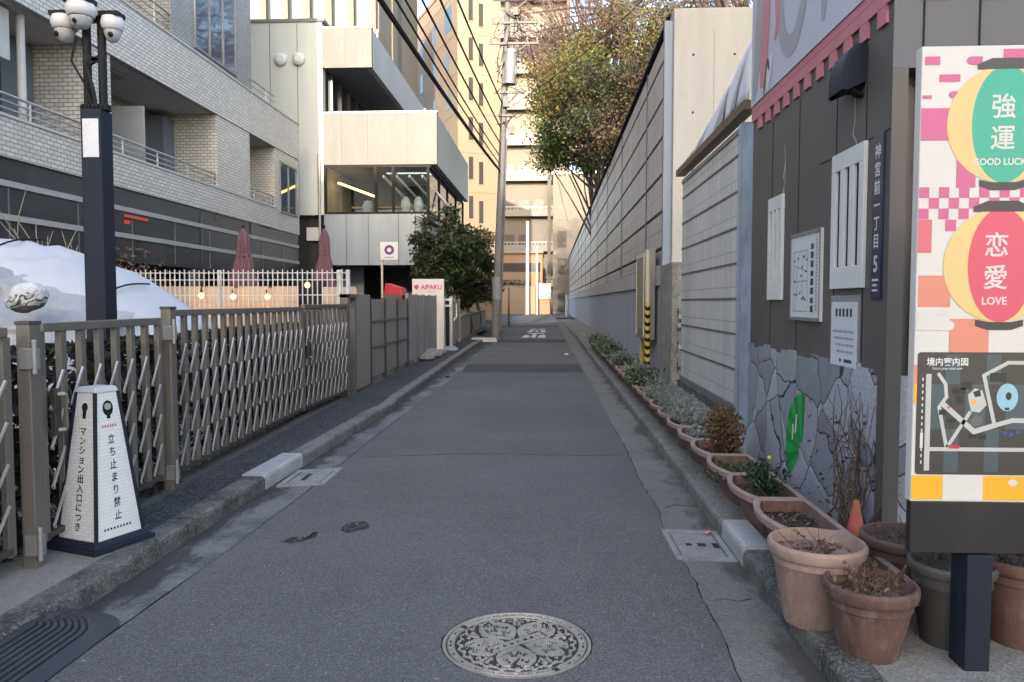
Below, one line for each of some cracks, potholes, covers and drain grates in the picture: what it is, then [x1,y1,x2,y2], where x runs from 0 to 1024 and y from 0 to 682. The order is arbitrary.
pothole [341,521,369,533]
pothole [280,531,319,543]
manhole cover [441,612,593,679]
